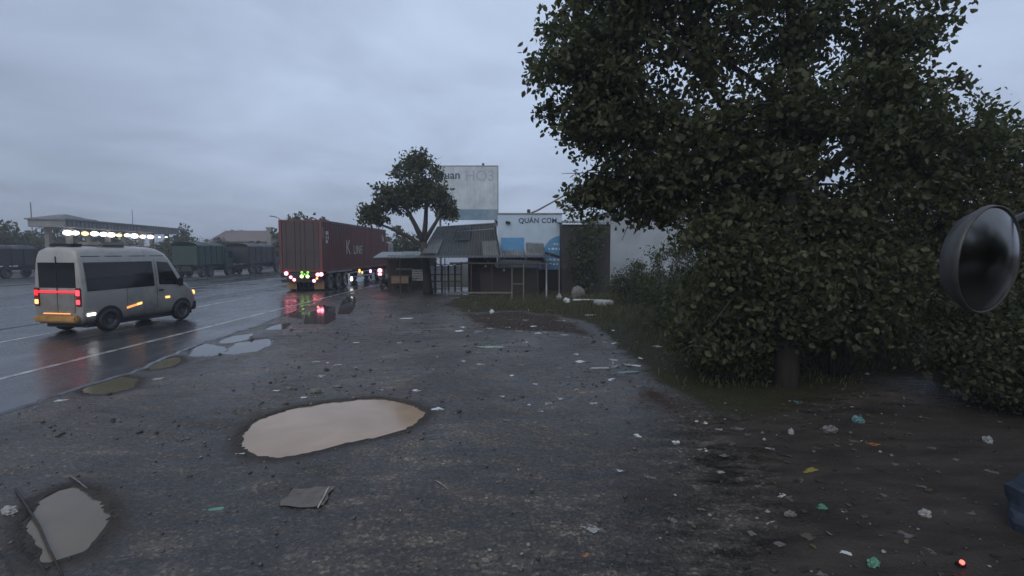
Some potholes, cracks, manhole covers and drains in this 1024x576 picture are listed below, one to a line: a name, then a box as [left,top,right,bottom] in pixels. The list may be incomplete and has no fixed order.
pothole [77,375,142,395]
pothole [149,356,184,370]
pothole [20,485,117,566]
pothole [237,398,430,459]
